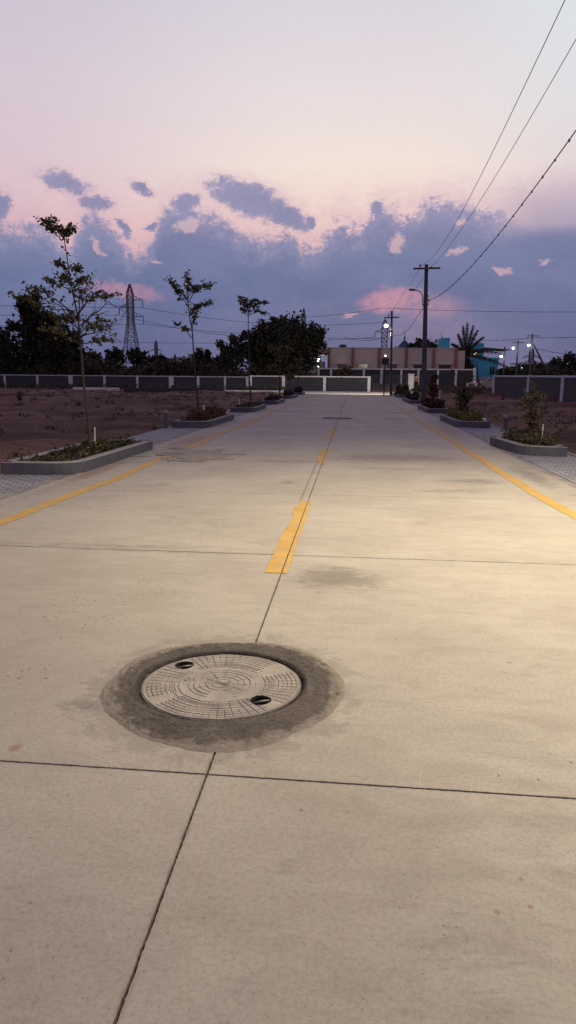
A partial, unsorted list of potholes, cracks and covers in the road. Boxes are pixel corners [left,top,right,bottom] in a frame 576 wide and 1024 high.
manhole cover [100,642,345,752]
